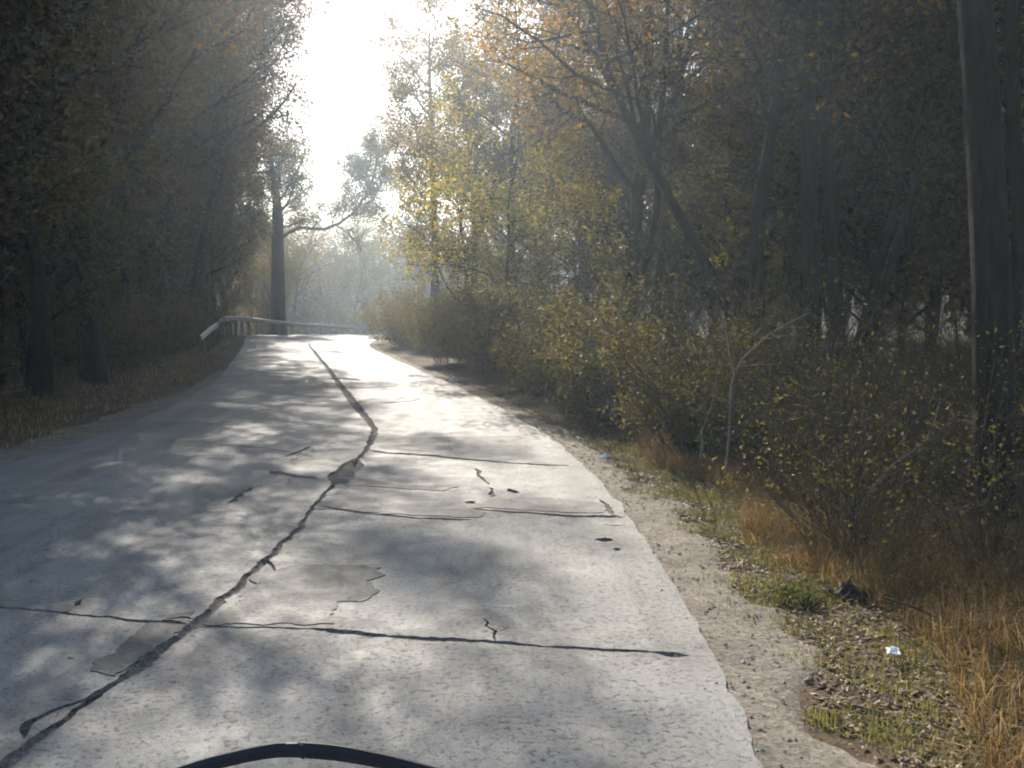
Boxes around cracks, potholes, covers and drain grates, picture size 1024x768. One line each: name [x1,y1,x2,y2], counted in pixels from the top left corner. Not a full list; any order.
crack [475,469,496,497]
crack [600,500,621,526]
crack [0,343,469,768]
crack [483,618,509,642]
pothole [327,459,364,486]
